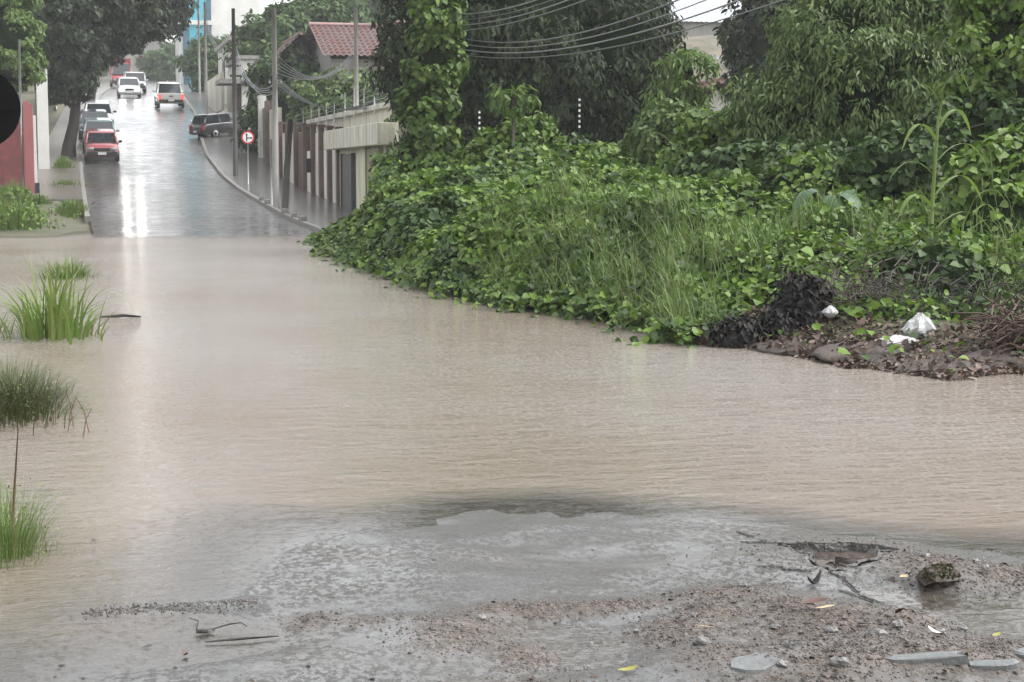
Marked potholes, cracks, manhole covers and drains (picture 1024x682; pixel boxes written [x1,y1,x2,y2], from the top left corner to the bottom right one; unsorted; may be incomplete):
crack [757,565,884,603]
crack [738,532,773,543]
pothole [776,542,903,571]
